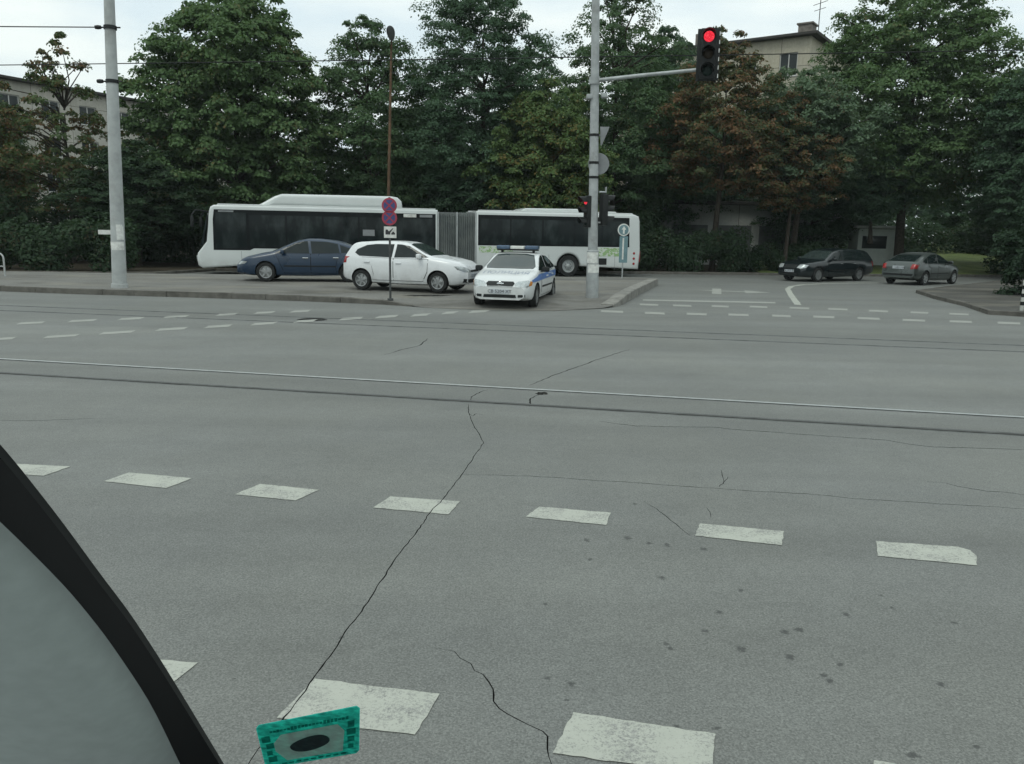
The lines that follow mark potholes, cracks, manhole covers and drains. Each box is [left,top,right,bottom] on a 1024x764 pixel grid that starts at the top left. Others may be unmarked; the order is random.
crack [248,391,1023,764]
